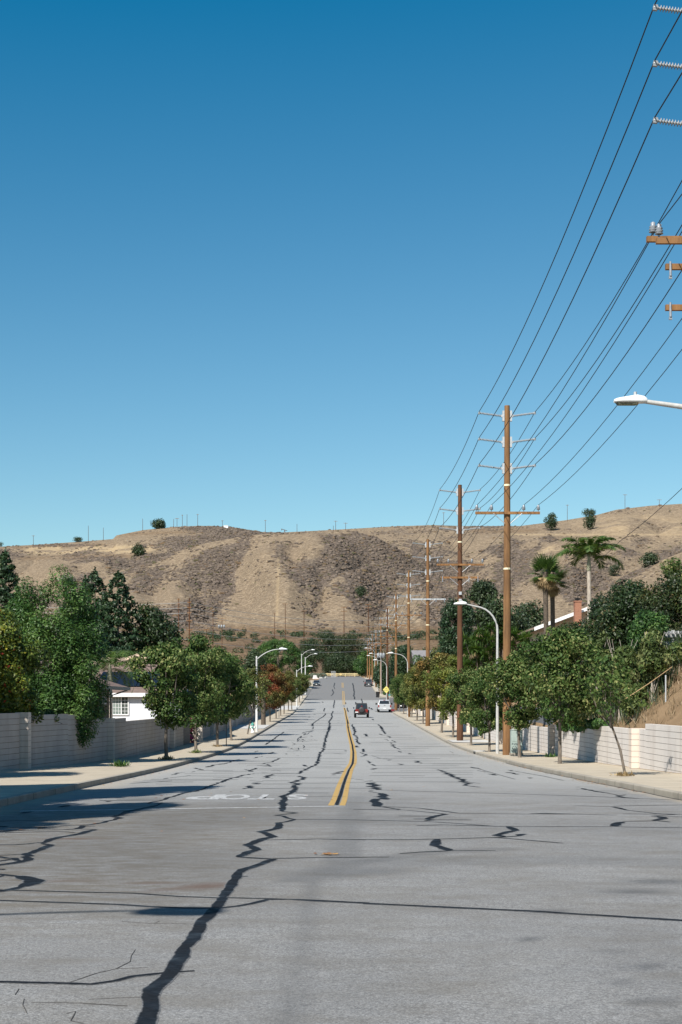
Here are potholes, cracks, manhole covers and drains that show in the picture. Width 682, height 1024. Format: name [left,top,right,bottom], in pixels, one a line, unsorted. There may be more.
crack [15,989,131,1023]
crack [71,949,146,982]
